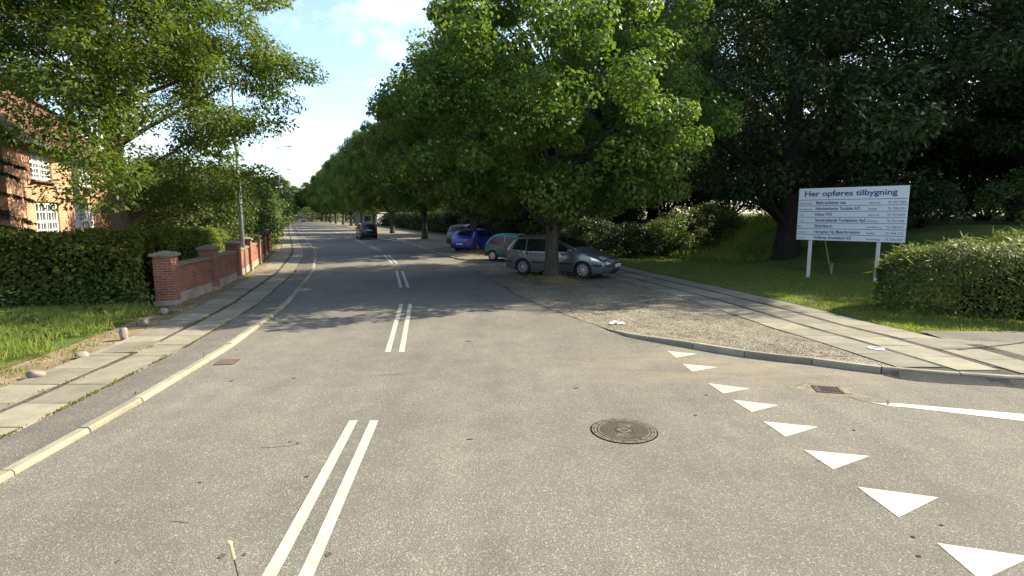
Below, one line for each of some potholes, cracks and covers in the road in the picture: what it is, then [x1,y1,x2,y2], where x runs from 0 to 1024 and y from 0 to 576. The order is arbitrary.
manhole cover [590,418,658,444]
drain grate [811,385,852,394]
